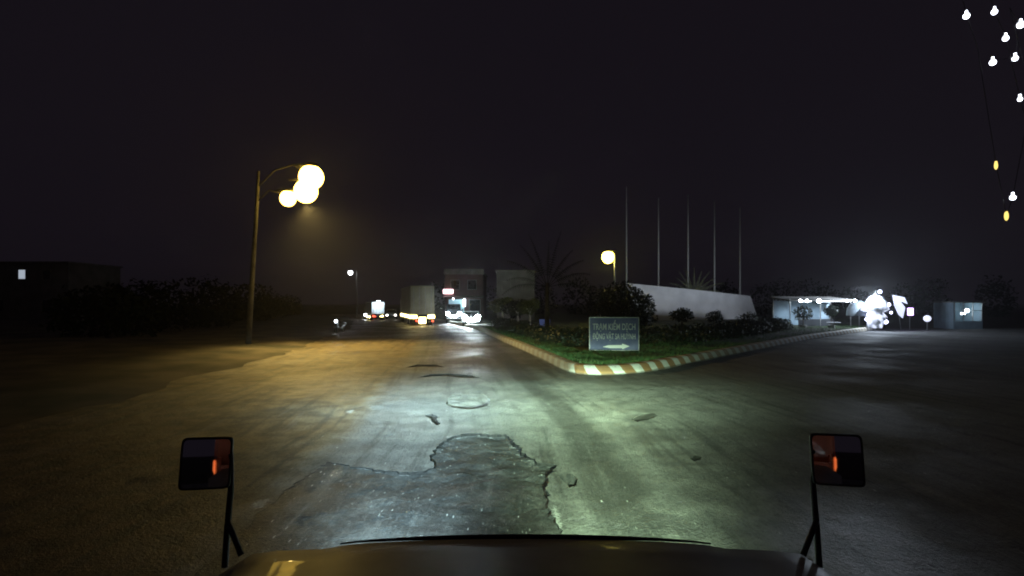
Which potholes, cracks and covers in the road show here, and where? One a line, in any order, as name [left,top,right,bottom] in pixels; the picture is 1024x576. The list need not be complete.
pothole [194,433,563,576]
pothole [632,413,658,422]
pothole [559,472,578,487]
